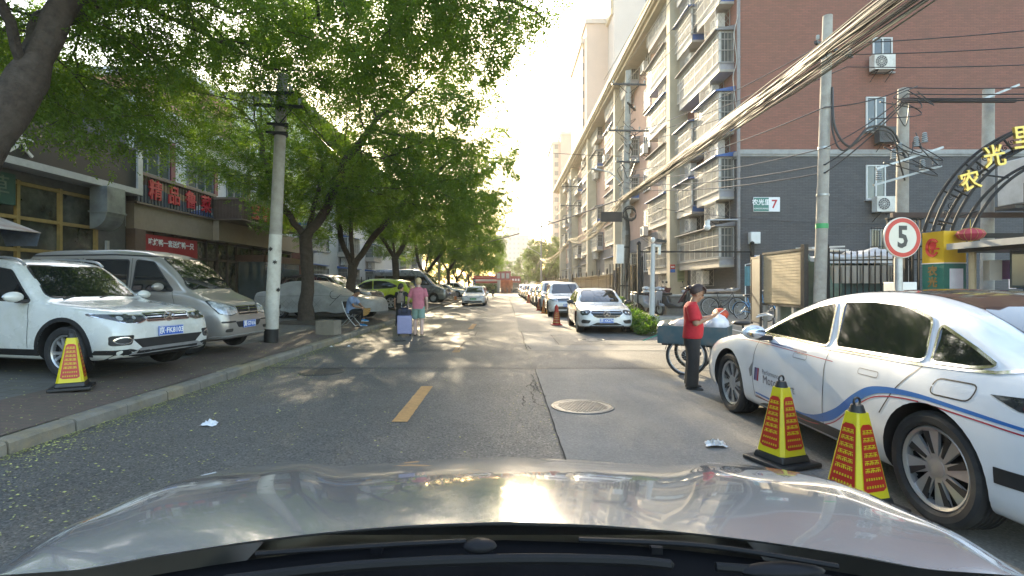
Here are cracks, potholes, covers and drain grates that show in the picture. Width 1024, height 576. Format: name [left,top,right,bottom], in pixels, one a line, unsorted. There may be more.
crack [522,375,546,406]
manhole cover [298,368,344,376]
manhole cover [551,399,615,414]
